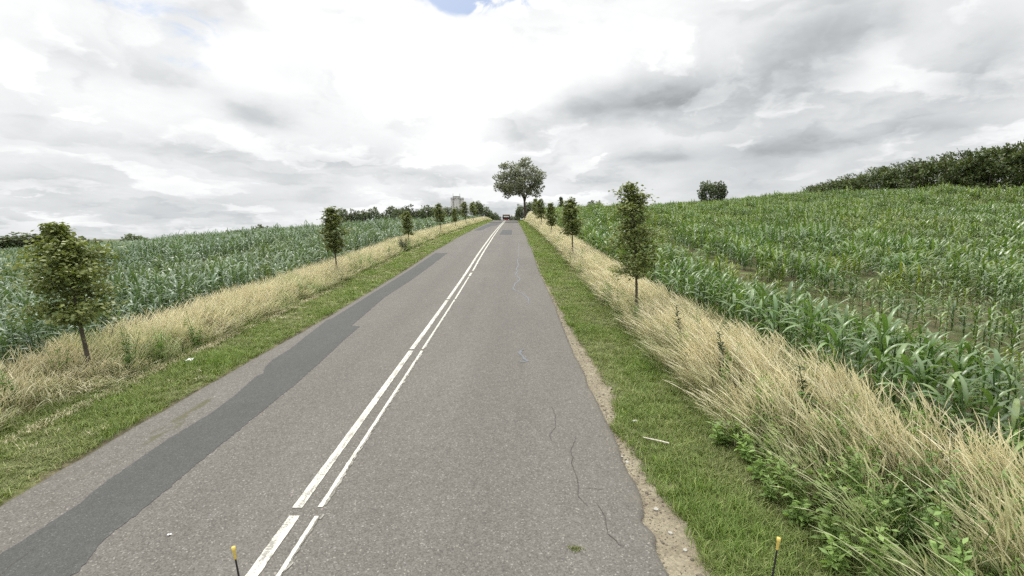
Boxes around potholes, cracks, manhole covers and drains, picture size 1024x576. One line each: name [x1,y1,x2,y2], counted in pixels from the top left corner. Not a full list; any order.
crack [550,406,624,546]
